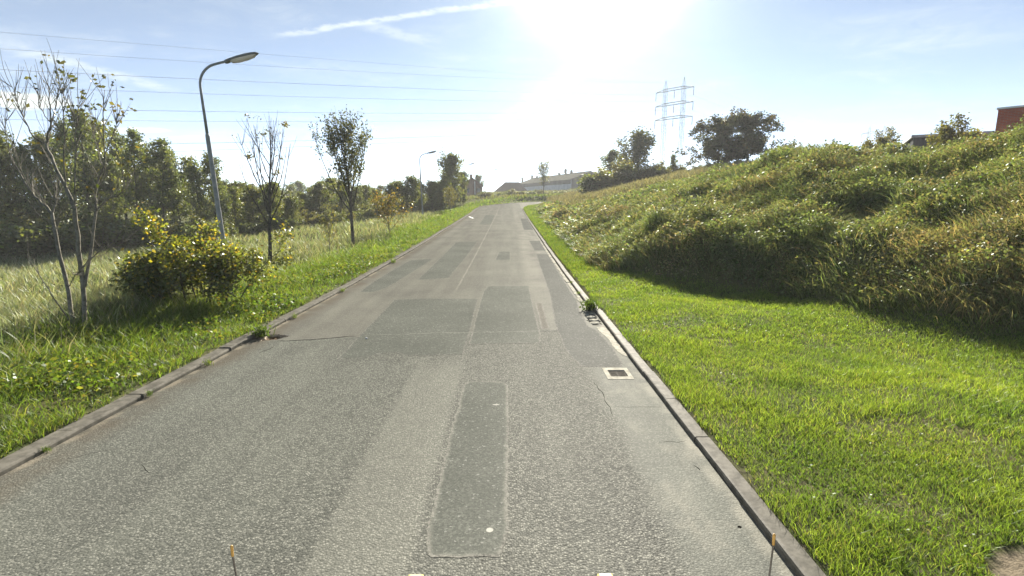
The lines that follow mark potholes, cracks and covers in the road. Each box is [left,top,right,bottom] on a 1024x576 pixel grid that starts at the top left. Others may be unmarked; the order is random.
drain grate [602,368,634,379]
